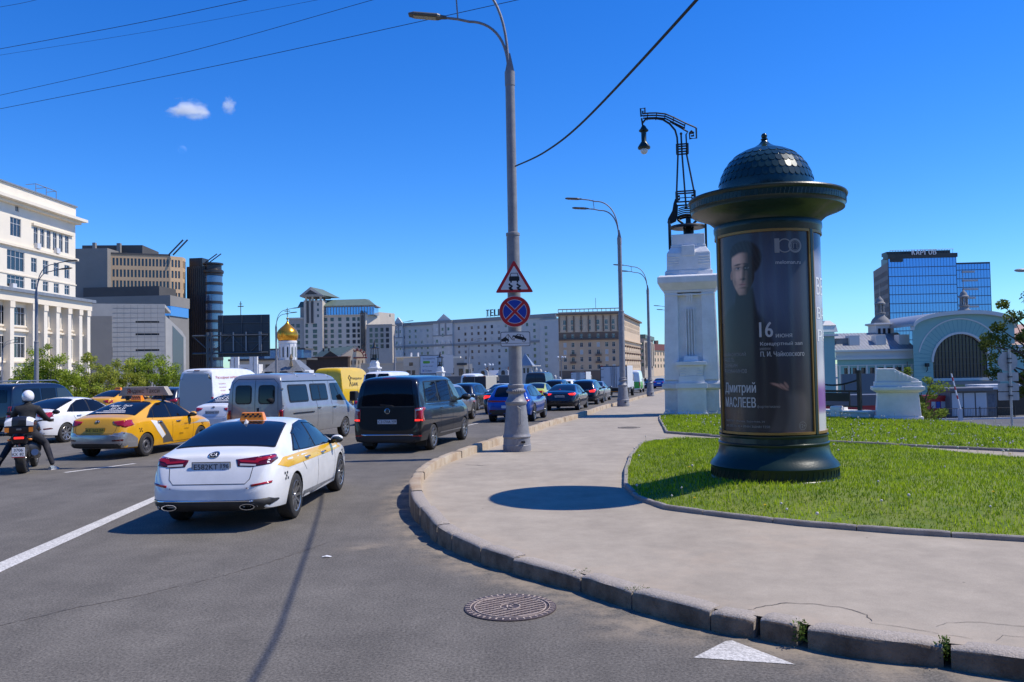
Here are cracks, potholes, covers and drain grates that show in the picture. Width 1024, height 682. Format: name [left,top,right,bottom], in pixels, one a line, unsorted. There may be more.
crack [747,602,872,620]
manhole cover [464,594,556,622]
